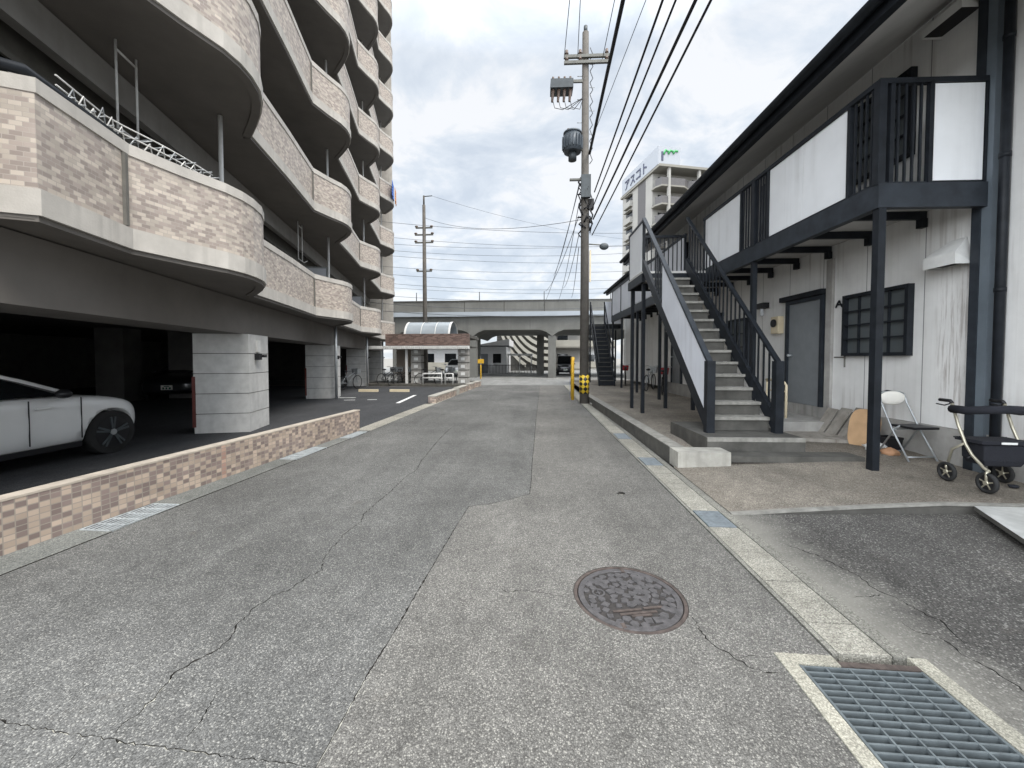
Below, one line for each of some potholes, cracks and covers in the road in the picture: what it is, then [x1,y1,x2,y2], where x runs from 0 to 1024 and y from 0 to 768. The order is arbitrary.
crack [790,546,1023,691]
drain grate [774,652,1024,768]
drain grate [79,503,179,532]
crack [692,617,788,673]
drain grate [281,447,327,460]
manhole cover [573,567,689,635]
crack [0,428,451,768]
